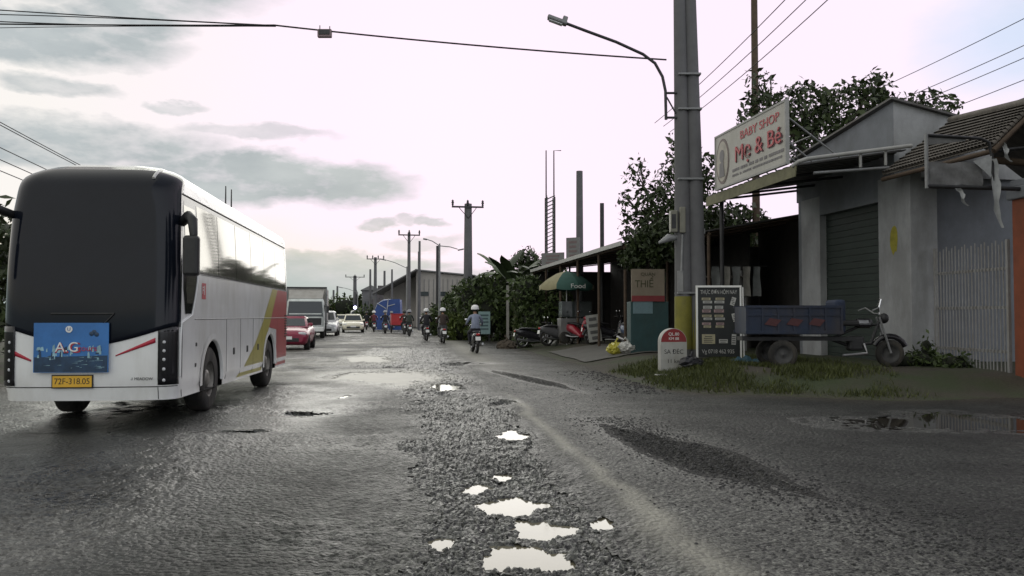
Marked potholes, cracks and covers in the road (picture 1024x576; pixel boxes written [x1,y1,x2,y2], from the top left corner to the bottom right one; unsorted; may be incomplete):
pothole [787,409,1024,435]
pothole [503,515,594,548]
pothole [450,480,502,498]
pothole [579,515,624,533]
pothole [483,471,521,484]
pothole [419,383,468,392]
pothole [461,492,569,520]
pothole [464,538,589,576]
pothole [482,428,538,443]
pothole [422,535,471,554]
